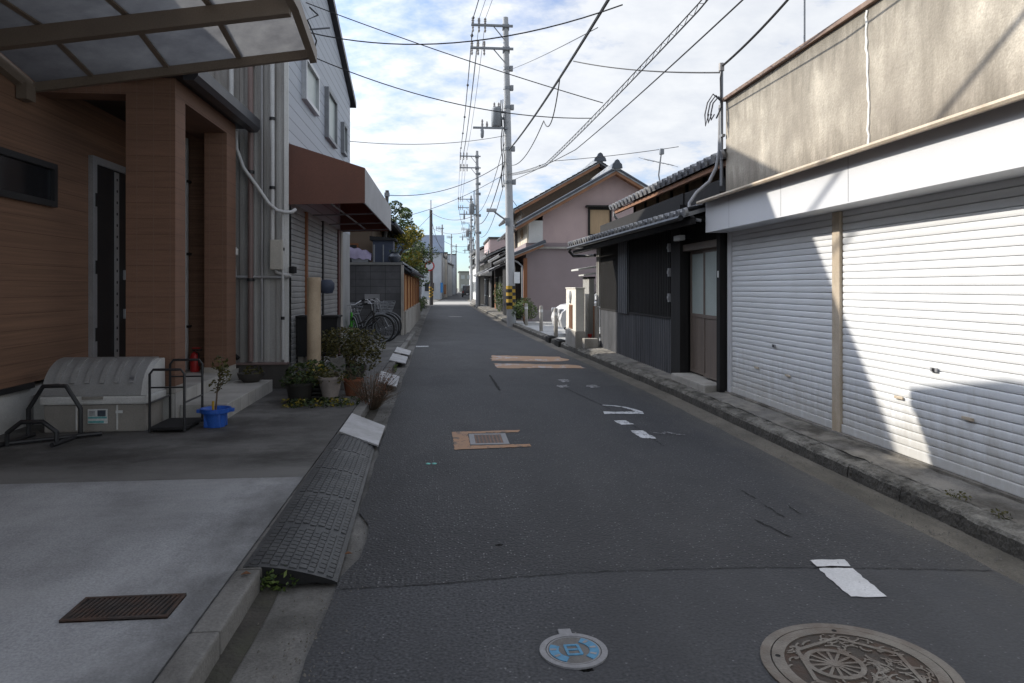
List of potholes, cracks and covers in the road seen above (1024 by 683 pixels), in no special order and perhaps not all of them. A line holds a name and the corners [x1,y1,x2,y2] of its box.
drain grate [59,593,187,623]
crack [742,490,802,537]
utility cover [539,628,608,670]
manhole cover [760,623,965,683]
